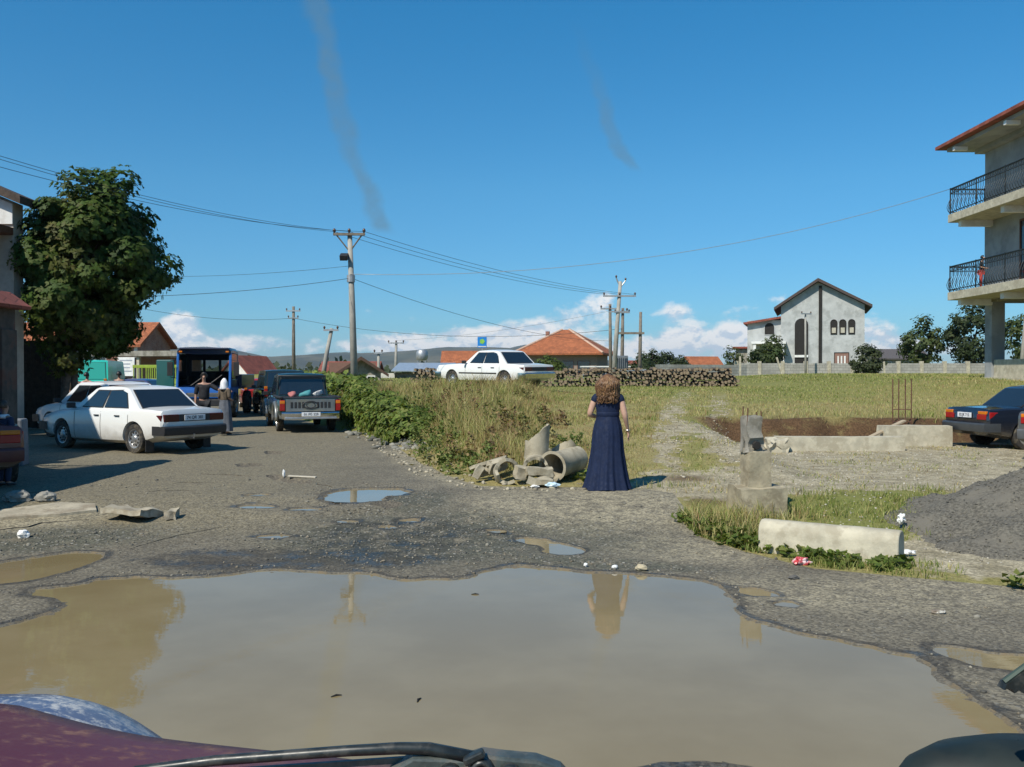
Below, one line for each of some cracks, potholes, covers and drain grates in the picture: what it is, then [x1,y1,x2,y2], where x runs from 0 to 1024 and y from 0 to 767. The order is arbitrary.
pothole [322,487,412,503]
pothole [0,564,1024,767]
pothole [0,551,105,584]
pothole [514,537,586,555]
